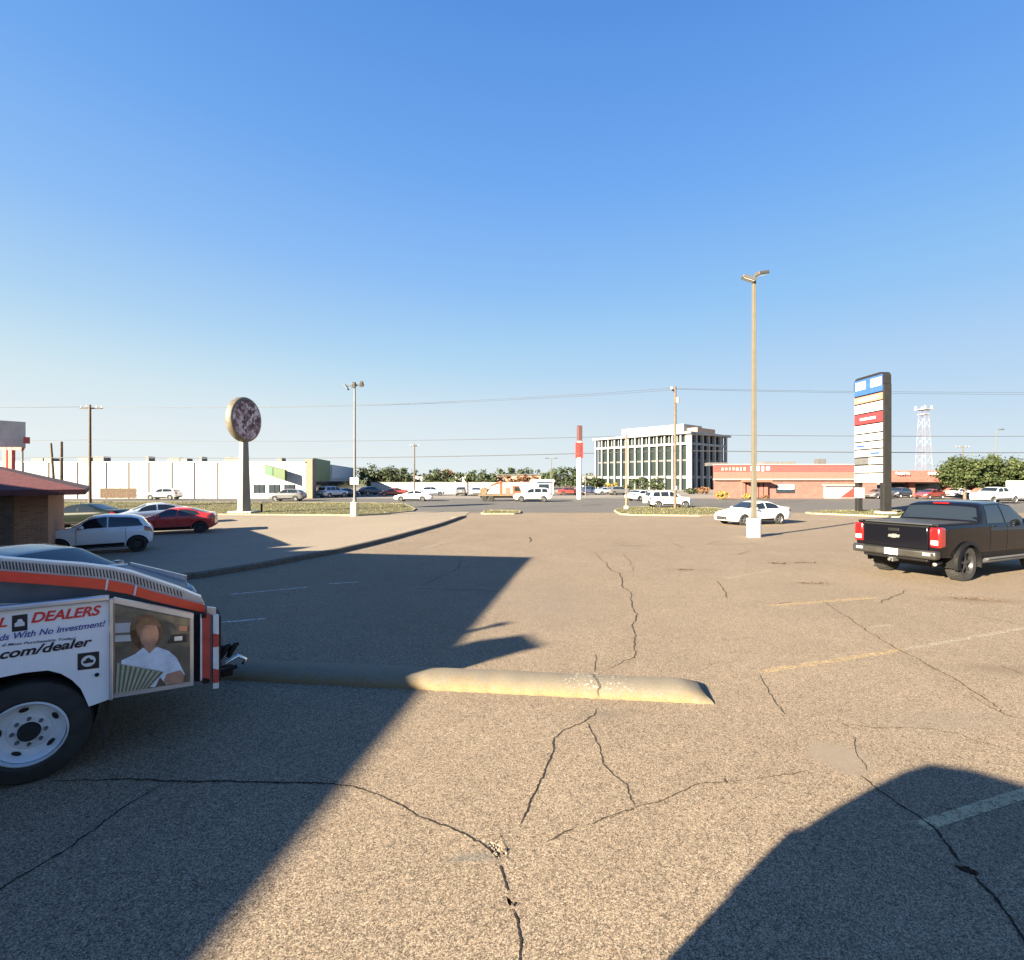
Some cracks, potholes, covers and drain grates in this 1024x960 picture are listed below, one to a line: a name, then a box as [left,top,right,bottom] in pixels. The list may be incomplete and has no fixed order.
crack [520,709,806,841]
crack [823,601,1024,941]
crack [0,778,522,960]
crack [594,543,638,671]
